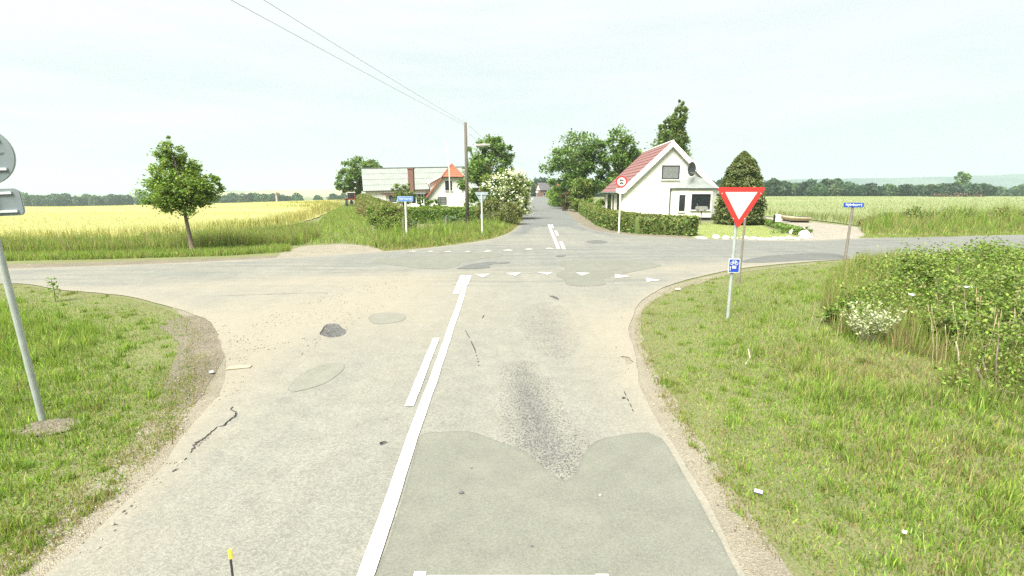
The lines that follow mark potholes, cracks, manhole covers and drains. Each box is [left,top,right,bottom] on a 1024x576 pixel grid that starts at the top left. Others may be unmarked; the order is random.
pothole [320,323,346,338]
crack [172,408,238,472]
